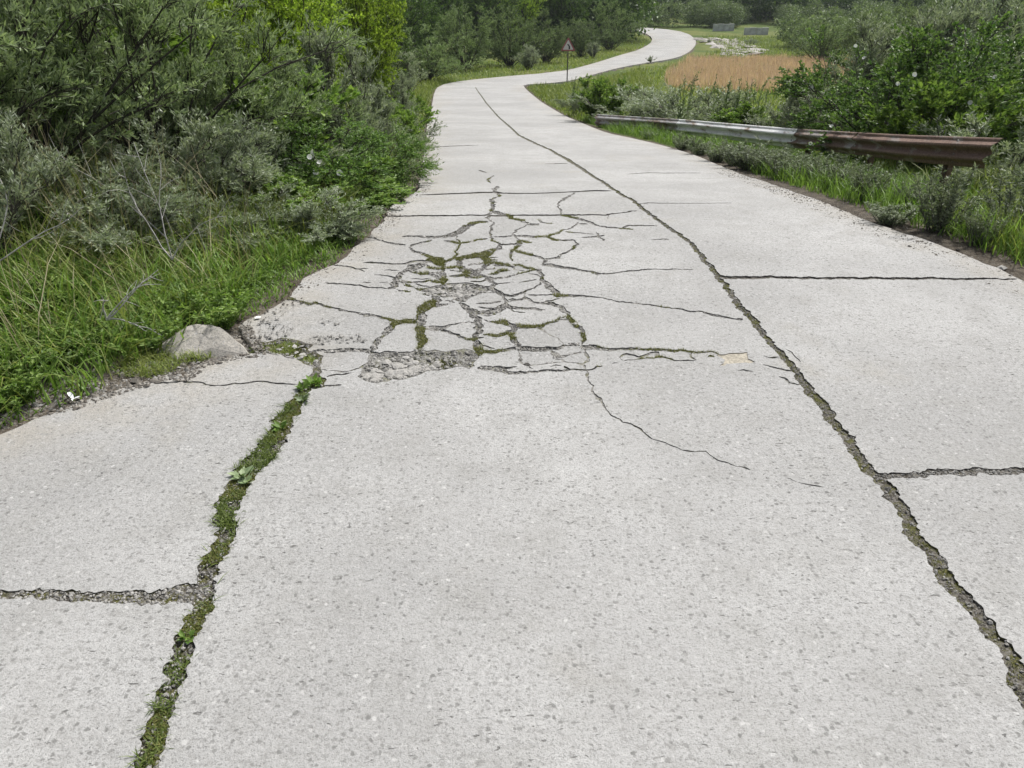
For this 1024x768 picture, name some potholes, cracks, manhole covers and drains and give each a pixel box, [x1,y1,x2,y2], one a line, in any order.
crack [286,170,822,487]
